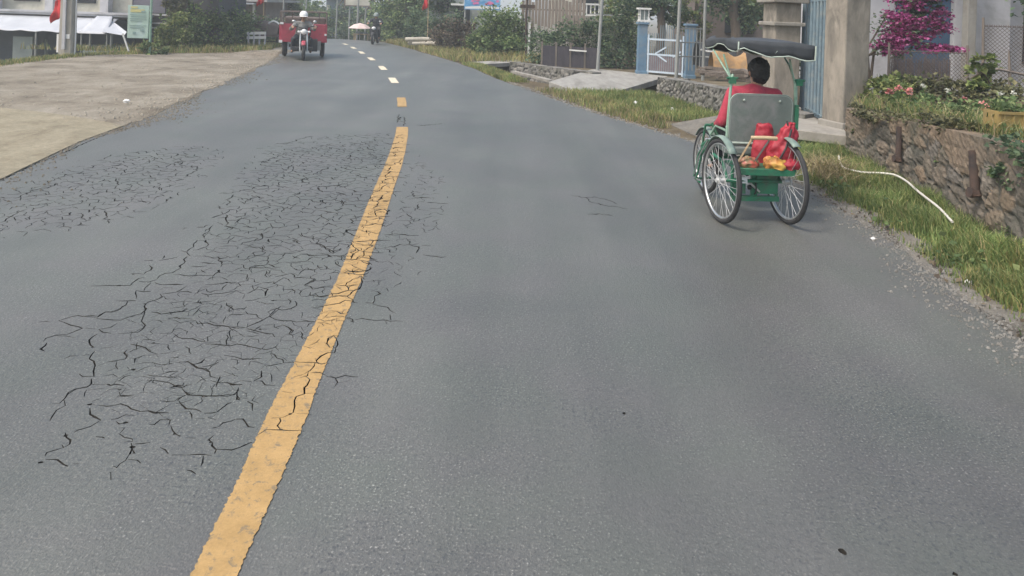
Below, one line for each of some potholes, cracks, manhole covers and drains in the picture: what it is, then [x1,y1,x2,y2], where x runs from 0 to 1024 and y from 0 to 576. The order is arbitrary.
crack [327,166,448,386]
crack [0,126,224,238]
crack [38,133,408,480]
